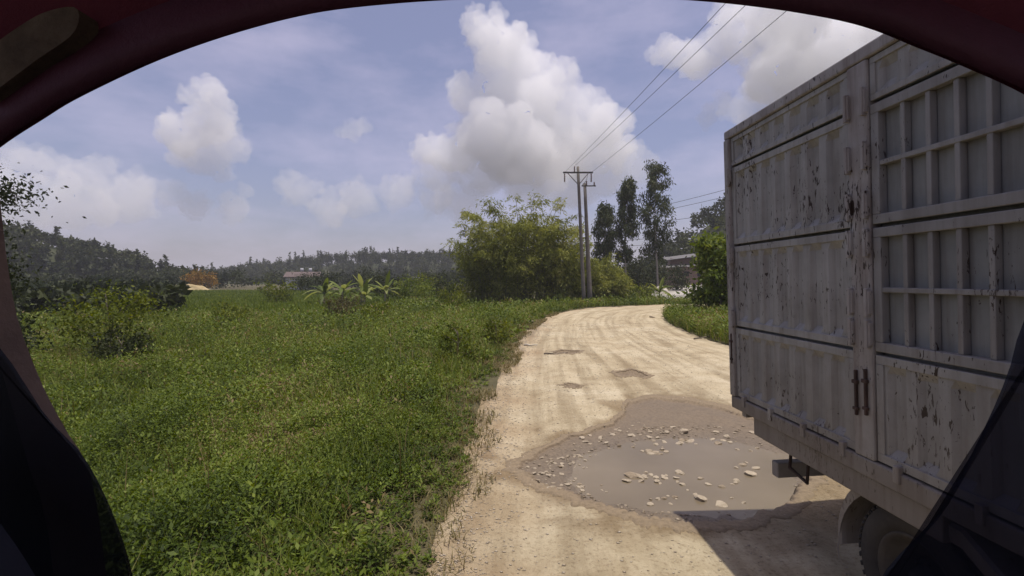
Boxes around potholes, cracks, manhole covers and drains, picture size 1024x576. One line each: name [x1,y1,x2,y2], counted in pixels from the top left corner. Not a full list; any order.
pothole [501,394,830,535]
pothole [608,368,655,379]
